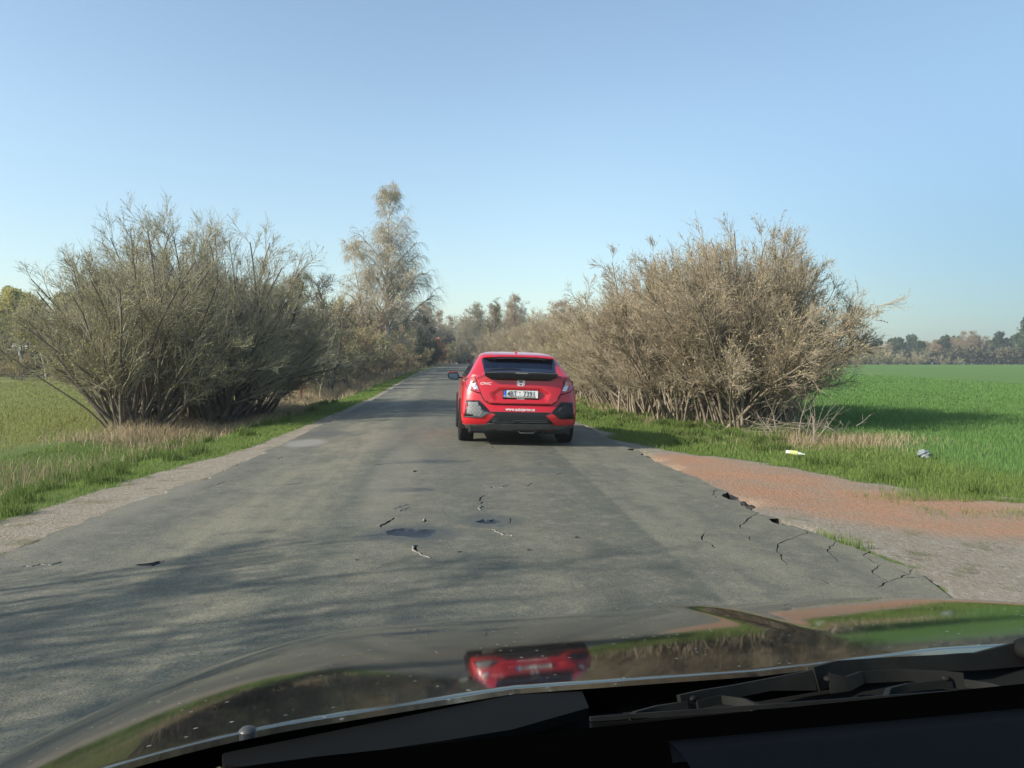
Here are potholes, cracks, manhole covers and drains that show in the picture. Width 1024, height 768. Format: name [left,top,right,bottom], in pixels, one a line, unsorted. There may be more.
crack [739,502,756,541]
crack [478,483,509,510]
crack [380,504,427,527]
pothole [386,528,436,538]
crack [411,545,431,558]
crack [862,551,933,587]
